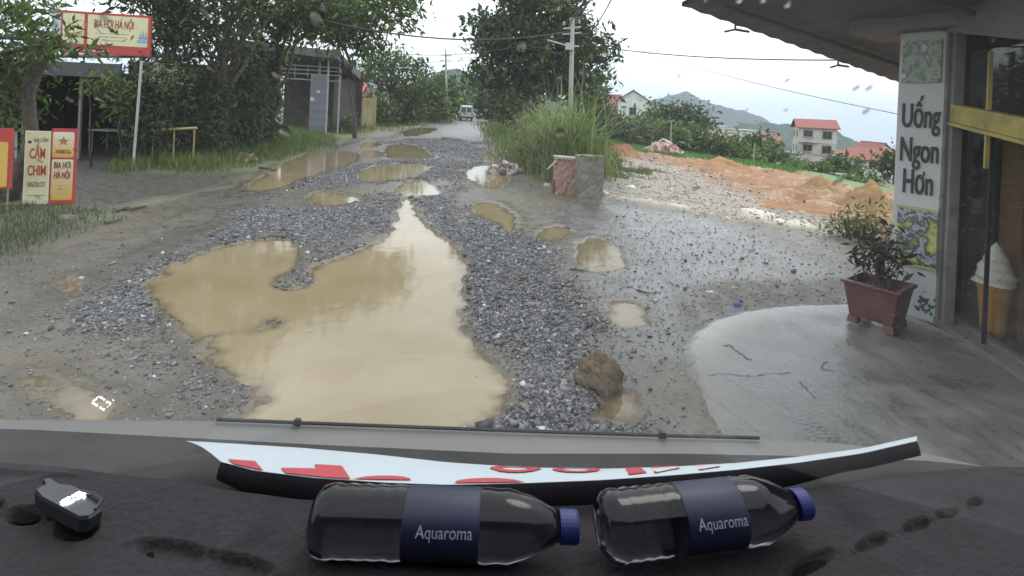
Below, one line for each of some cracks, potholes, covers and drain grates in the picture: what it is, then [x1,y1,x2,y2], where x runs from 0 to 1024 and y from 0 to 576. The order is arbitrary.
pothole [528,223,584,243]
pothole [565,234,637,274]
pothole [572,379,667,432]
pothole [130,196,527,427]
pothole [0,365,141,420]
pothole [301,189,370,207]
pothole [385,178,448,197]
pothole [393,127,446,137]
crack [712,342,850,398]
pothole [464,164,513,189]
pothole [355,162,438,182]
pothole [595,297,659,334]
